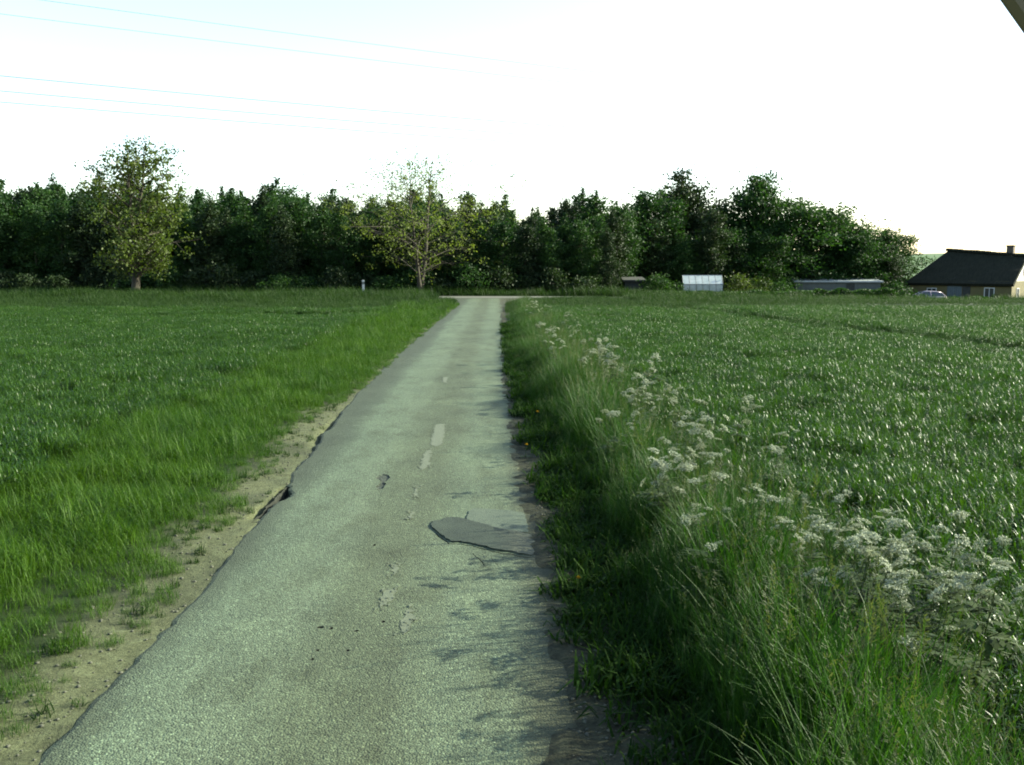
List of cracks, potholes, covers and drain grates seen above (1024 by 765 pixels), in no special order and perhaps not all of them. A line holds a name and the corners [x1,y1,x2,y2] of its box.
pothole [376,474,391,490]
pothole [251,487,289,523]
